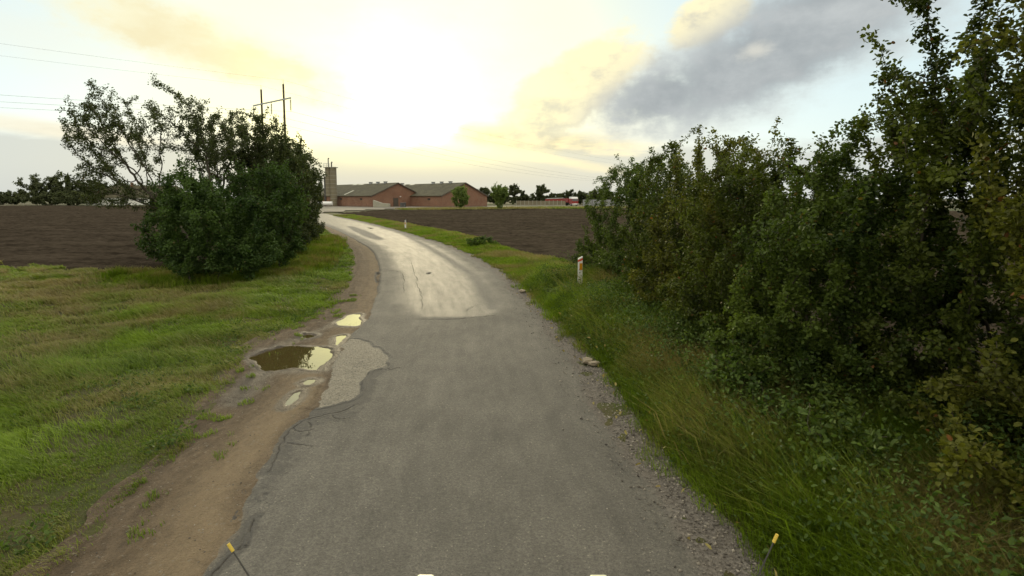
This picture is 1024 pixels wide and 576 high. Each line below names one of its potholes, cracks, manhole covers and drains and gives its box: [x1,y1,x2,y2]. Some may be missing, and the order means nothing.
pothole [331,334,350,347]
pothole [277,389,307,411]
pothole [246,345,338,372]
pothole [333,313,365,327]
crack [378,260,425,309]
crack [264,403,359,472]
